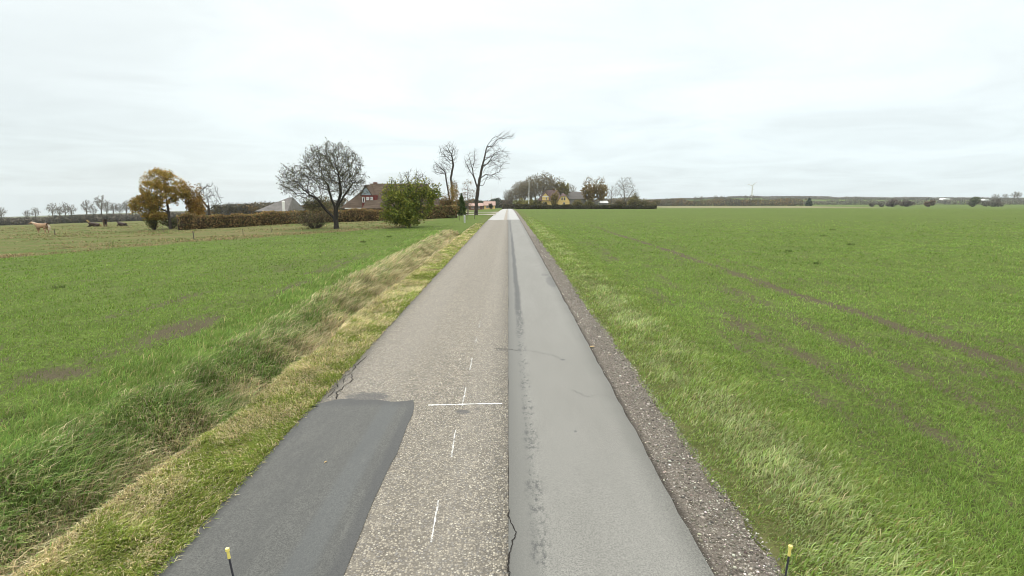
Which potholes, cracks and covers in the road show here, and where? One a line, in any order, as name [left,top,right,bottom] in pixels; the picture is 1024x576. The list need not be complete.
crack [328,356,367,399]
crack [507,509,517,576]
